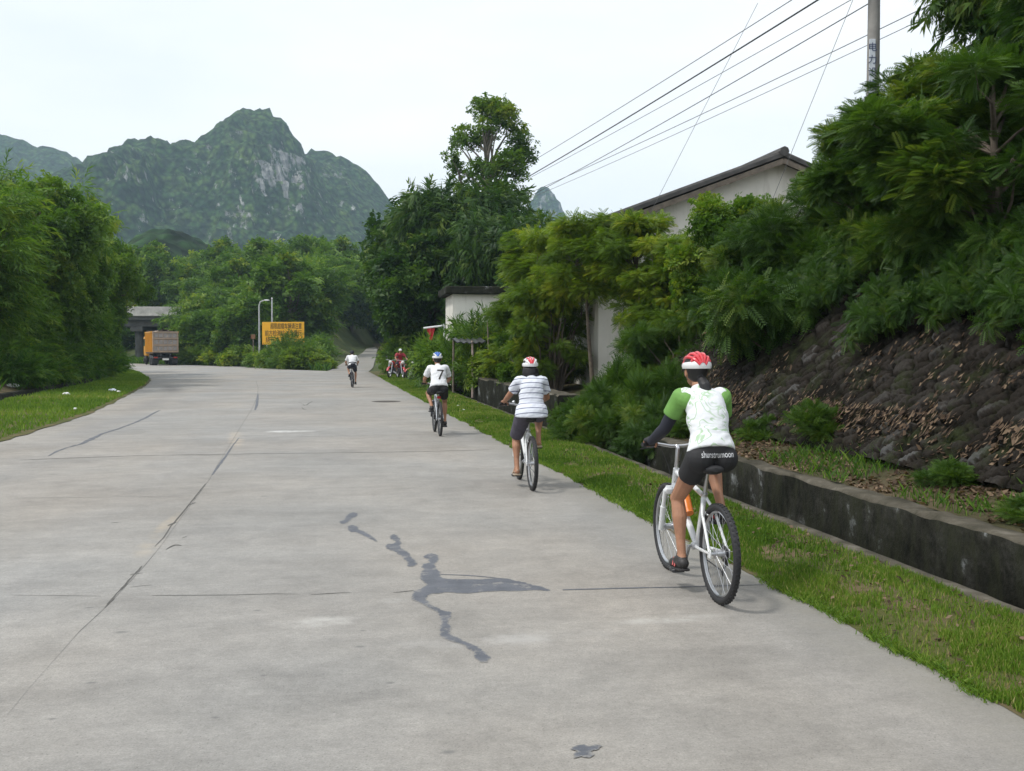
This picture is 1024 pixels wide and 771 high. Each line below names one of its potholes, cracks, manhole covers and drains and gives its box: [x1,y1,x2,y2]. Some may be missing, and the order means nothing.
crack [155,484,205,549]
crack [105,566,144,607]
